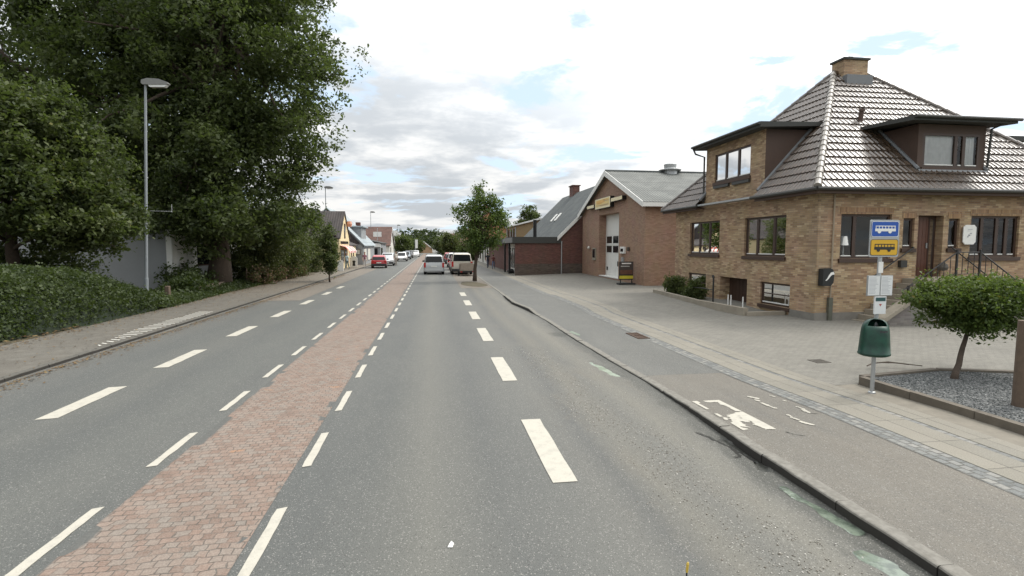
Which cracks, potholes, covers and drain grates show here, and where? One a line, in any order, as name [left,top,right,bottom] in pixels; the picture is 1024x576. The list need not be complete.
crack [696,433,755,462]
